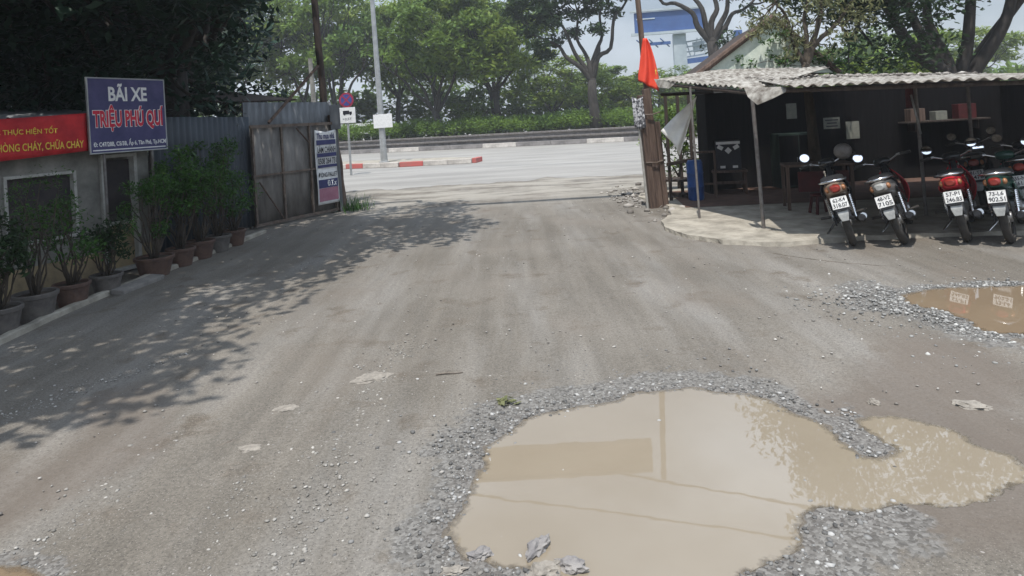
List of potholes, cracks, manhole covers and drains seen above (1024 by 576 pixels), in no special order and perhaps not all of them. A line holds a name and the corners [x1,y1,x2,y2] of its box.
pothole [899,285,1024,335]
pothole [441,387,1024,576]
